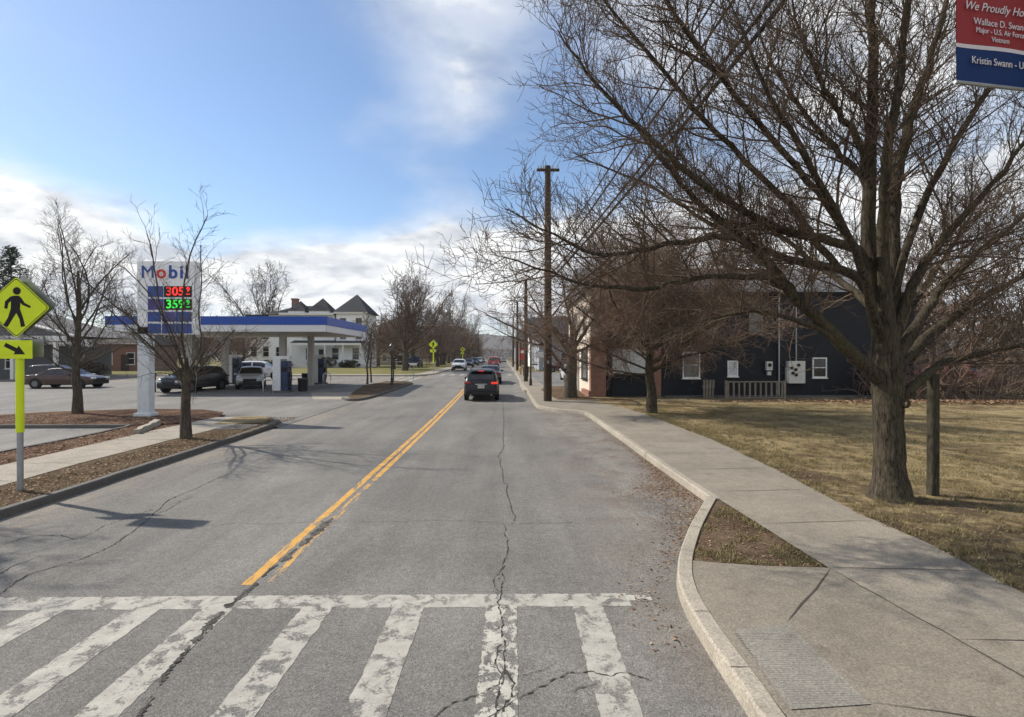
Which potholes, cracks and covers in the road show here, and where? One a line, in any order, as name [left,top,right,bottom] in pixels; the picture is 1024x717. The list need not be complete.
crack [1,476,221,593]
crack [209,401,649,717]
